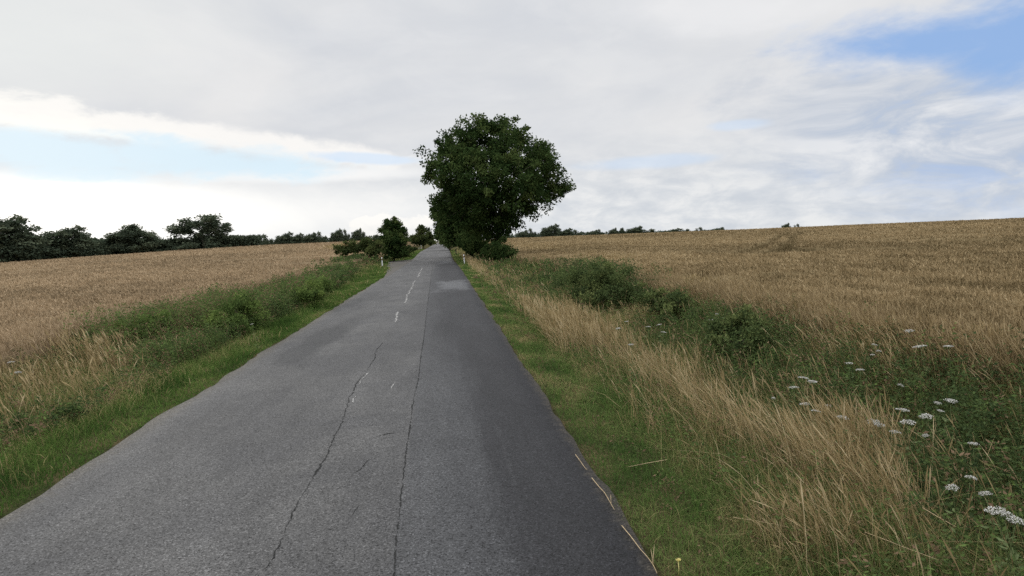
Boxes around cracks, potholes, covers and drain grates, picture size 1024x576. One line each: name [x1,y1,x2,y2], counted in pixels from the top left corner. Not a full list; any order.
crack [257,343,382,574]
